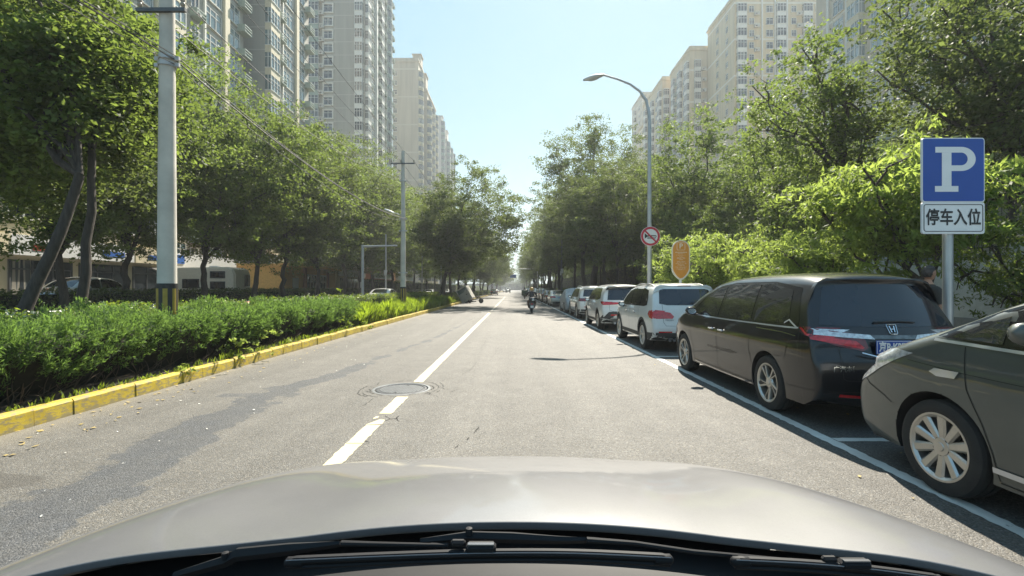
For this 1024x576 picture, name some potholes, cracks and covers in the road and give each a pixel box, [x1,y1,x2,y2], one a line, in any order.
crack [358,355,494,421]
manhole cover [372,383,431,395]
